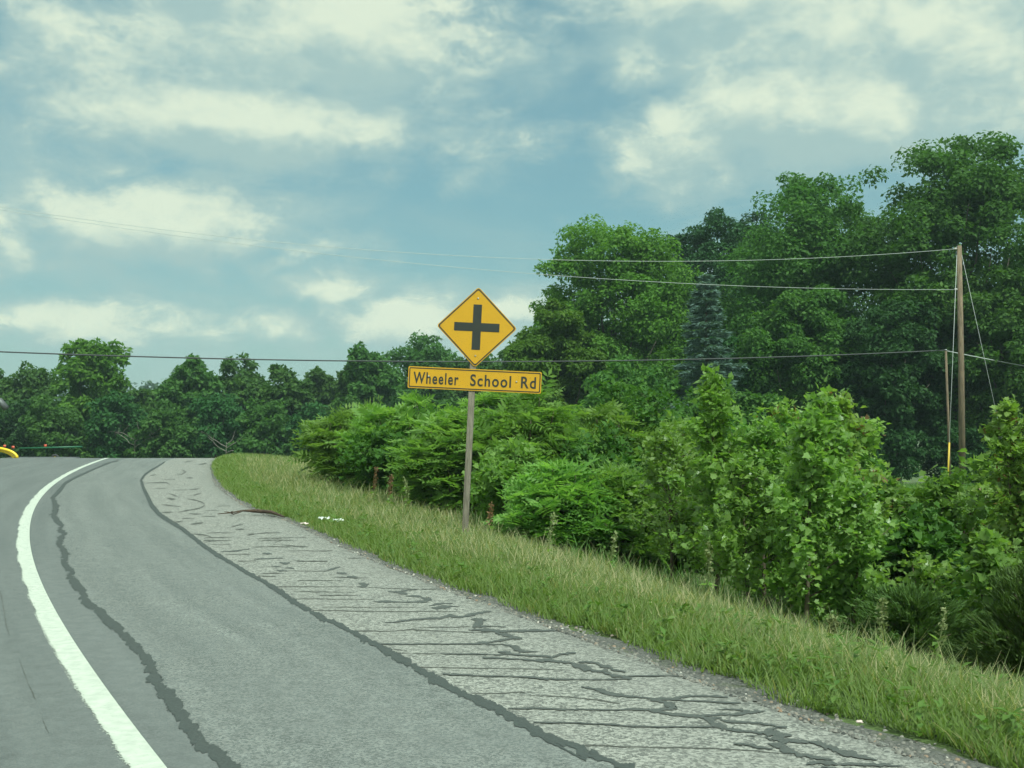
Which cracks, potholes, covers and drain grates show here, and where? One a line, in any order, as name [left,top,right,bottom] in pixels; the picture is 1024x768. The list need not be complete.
crack [0,592,49,733]
crack [150,461,906,768]
